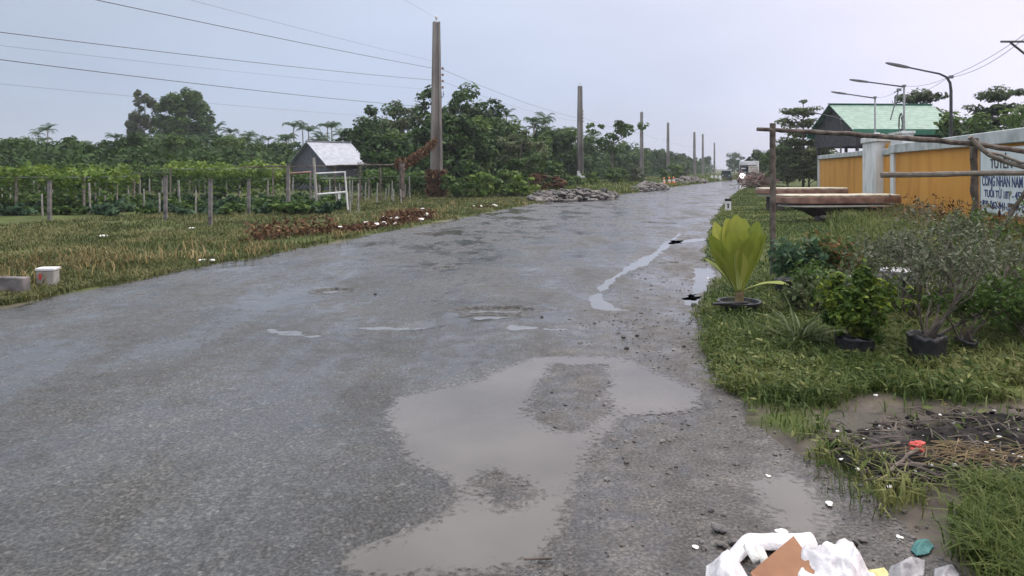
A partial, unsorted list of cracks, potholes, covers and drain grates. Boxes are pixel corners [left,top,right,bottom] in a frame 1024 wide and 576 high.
pothole [307,287,360,295]
pothole [438,304,555,316]
